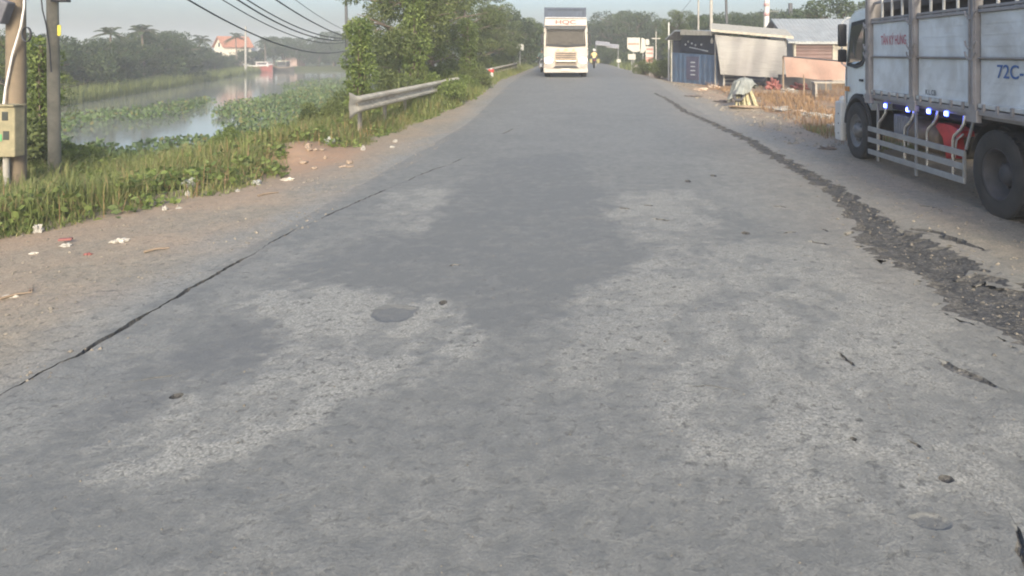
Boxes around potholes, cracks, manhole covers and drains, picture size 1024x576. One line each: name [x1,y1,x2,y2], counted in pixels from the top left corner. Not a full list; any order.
pothole [893,504,968,540]
crack [0,153,479,402]
pothole [734,229,757,237]
pothole [360,301,430,326]
